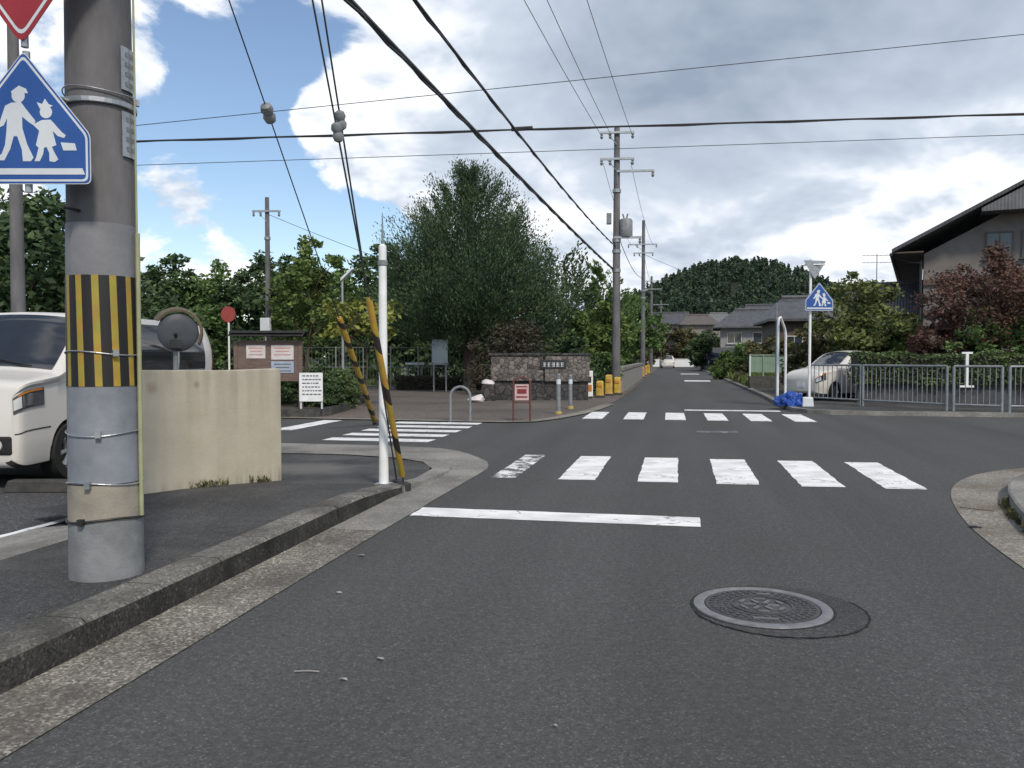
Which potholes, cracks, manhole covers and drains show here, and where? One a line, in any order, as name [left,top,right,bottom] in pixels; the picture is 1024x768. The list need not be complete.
manhole cover [690,587,837,630]
